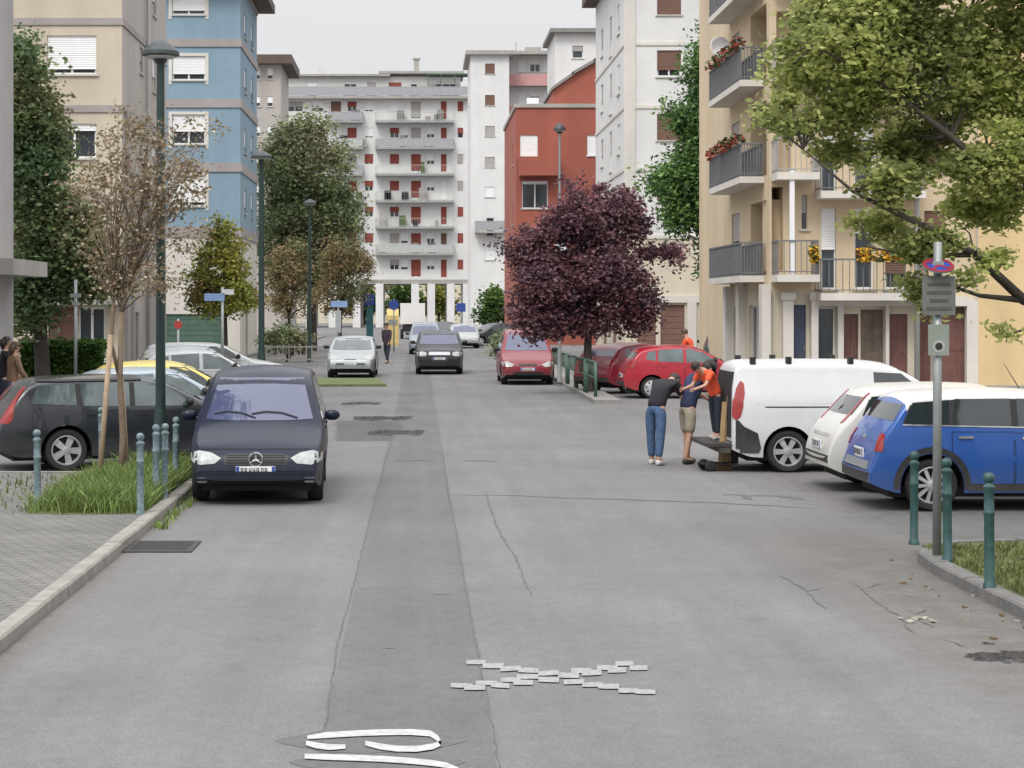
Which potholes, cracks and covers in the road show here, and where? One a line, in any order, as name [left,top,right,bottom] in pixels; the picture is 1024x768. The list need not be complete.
drain grate [122,541,201,553]
crack [485,491,819,595]
crack [854,583,966,647]
crack [780,575,826,609]
